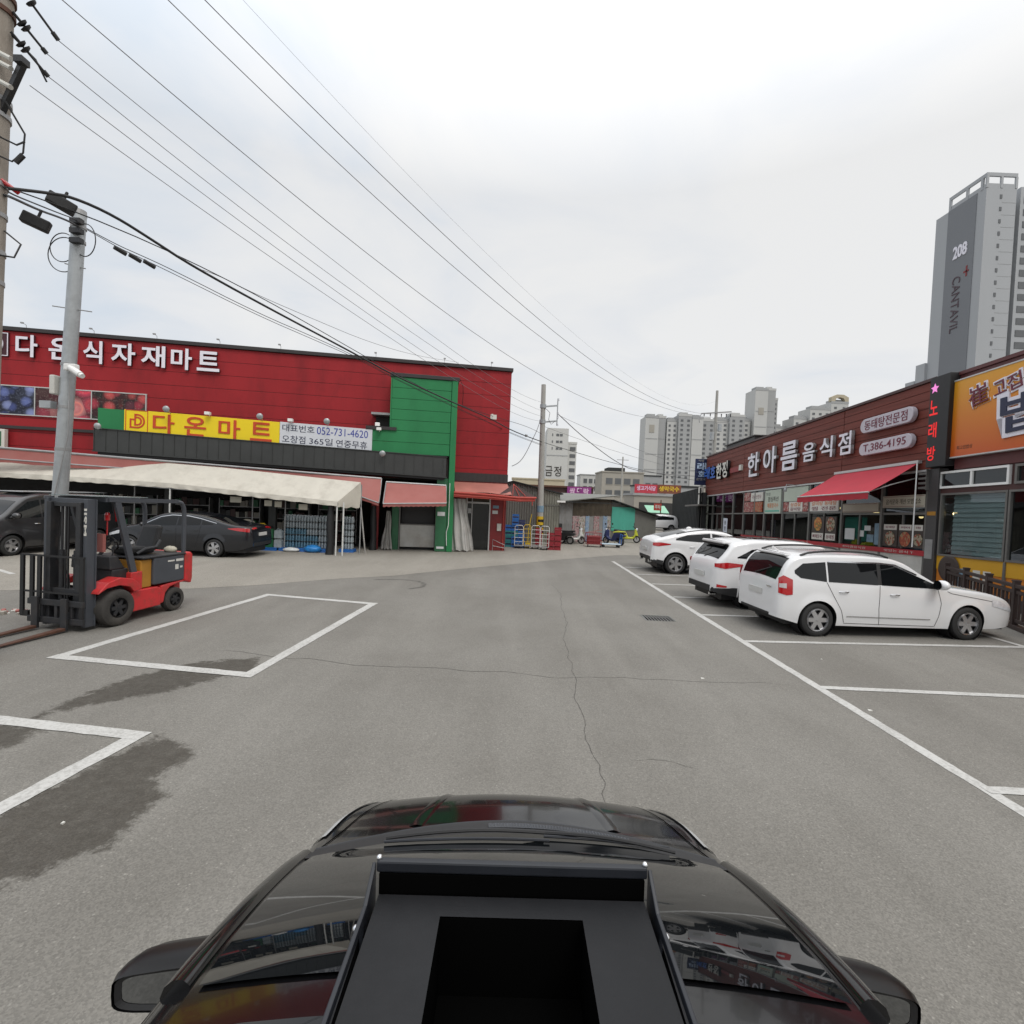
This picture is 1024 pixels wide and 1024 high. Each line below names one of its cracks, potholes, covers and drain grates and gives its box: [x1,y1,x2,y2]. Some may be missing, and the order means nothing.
crack [228,586,785,803]
